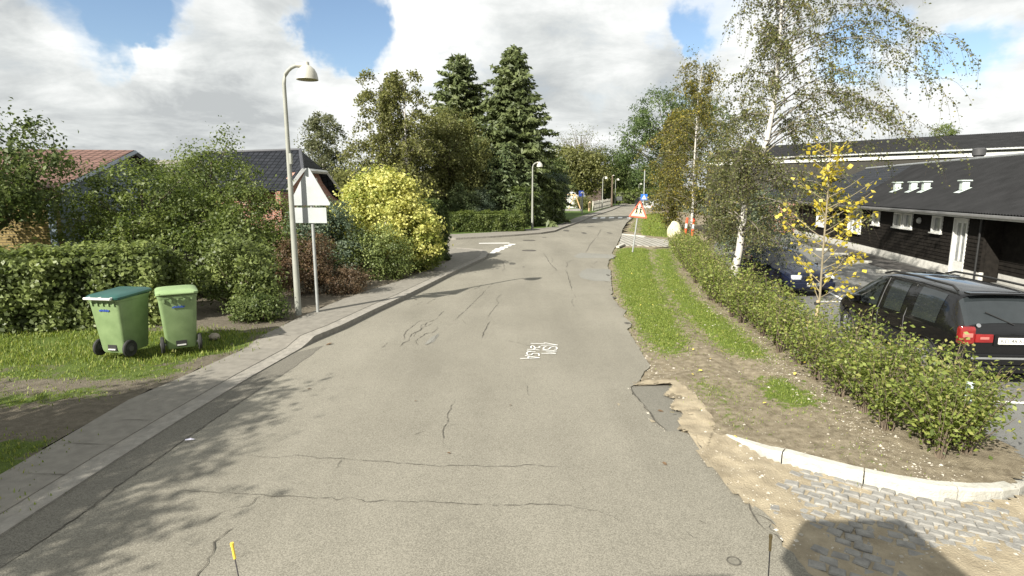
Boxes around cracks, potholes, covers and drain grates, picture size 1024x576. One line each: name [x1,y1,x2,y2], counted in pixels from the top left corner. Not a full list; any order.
crack [188,490,616,576]
manhole cover [726,556,741,566]
crack [250,455,556,467]
pothole [631,384,683,432]
crack [383,261,515,347]
